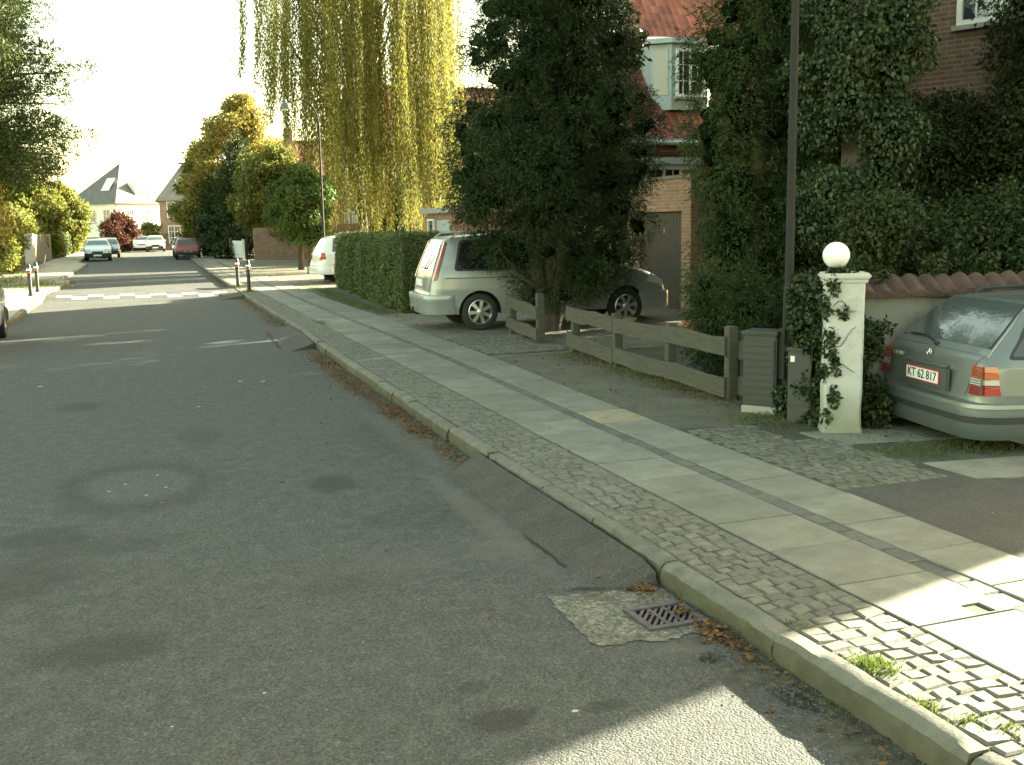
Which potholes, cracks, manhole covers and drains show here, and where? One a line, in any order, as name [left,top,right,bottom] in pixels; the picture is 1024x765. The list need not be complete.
crack [523,533,569,569]
